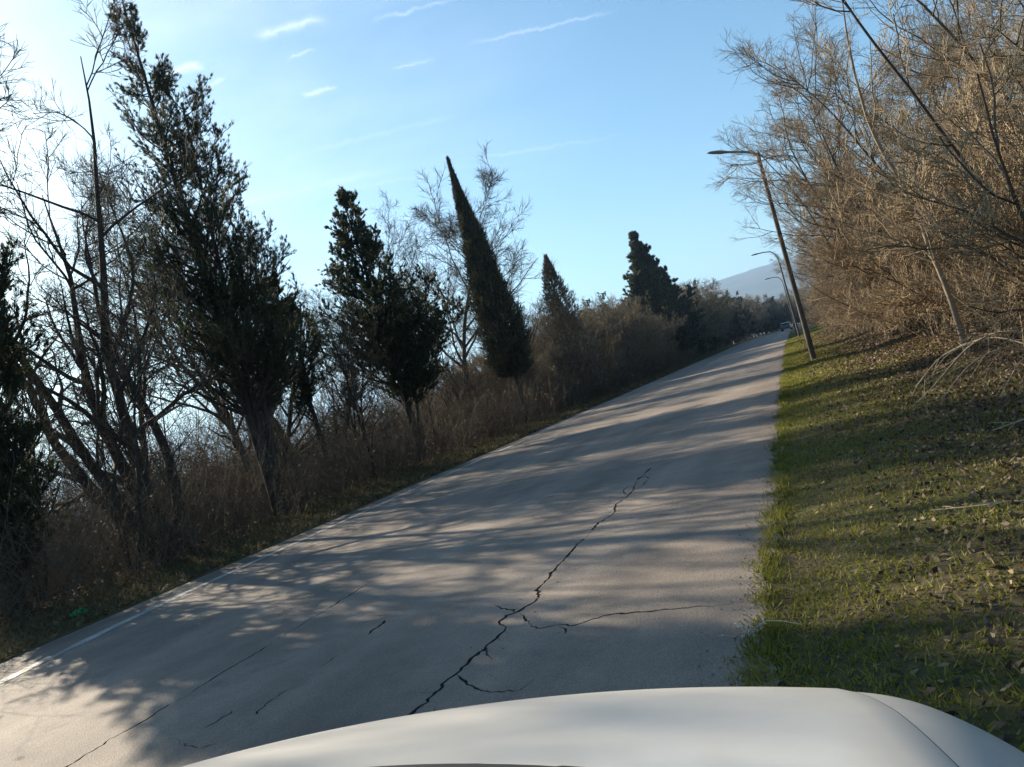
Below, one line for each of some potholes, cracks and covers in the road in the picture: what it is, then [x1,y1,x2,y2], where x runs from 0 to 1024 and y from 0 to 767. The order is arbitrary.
crack [408,467,719,715]
